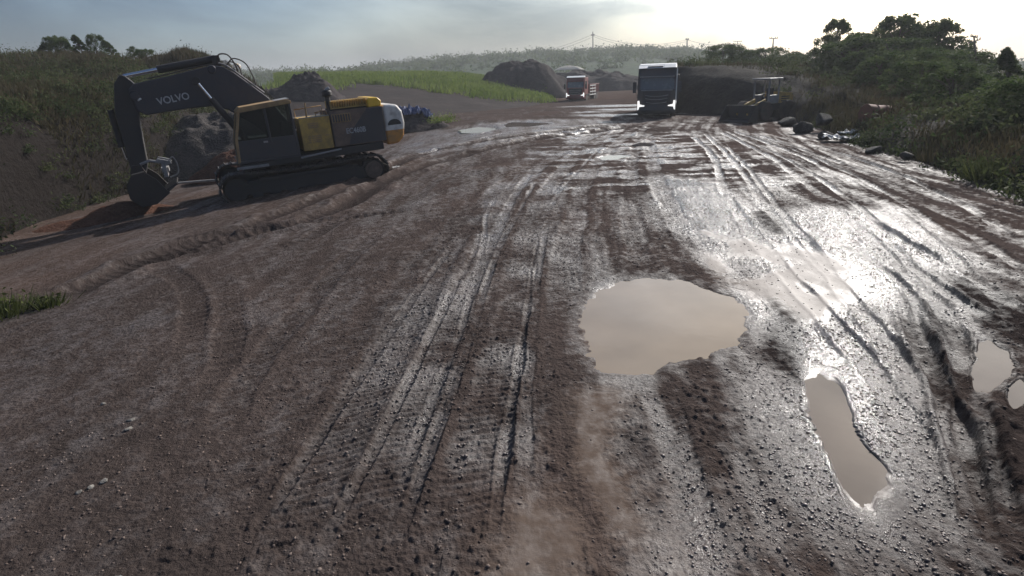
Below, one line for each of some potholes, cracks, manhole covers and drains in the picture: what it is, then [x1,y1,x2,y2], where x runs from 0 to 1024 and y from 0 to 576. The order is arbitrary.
pothole [968,333,1023,402]
pothole [1004,375,1024,412]
pothole [456,125,503,135]
pothole [559,270,772,392]
pothole [797,361,910,538]
